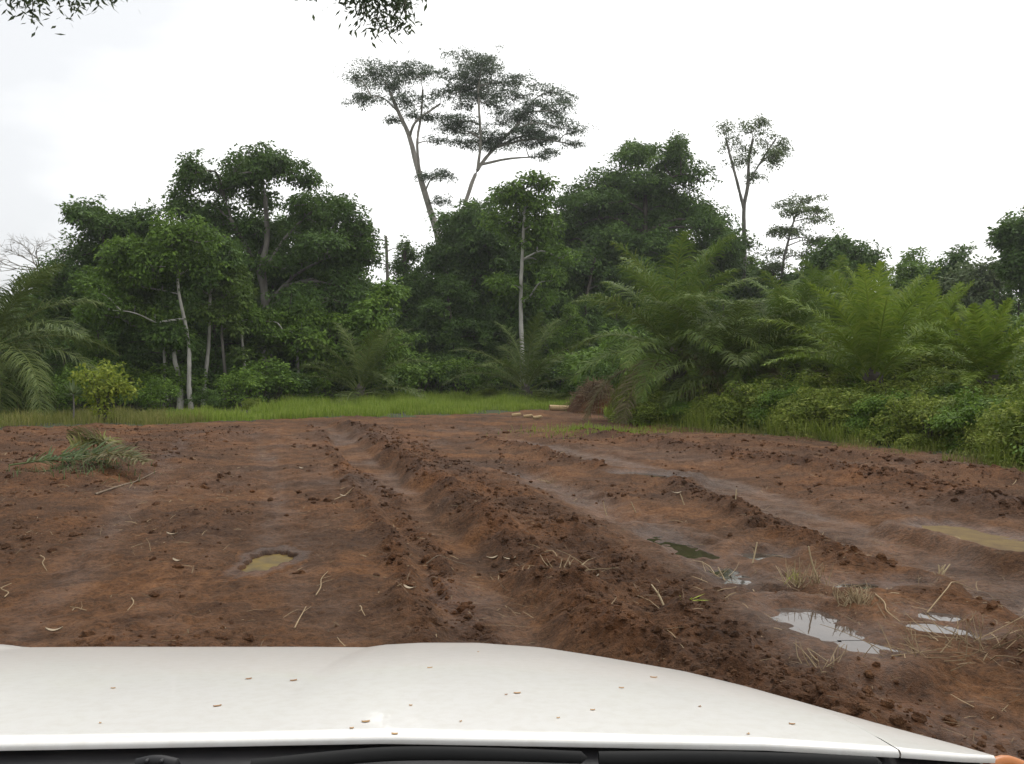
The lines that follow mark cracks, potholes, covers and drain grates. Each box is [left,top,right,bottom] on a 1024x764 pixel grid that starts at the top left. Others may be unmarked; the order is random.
pothole [213,542,318,581]
